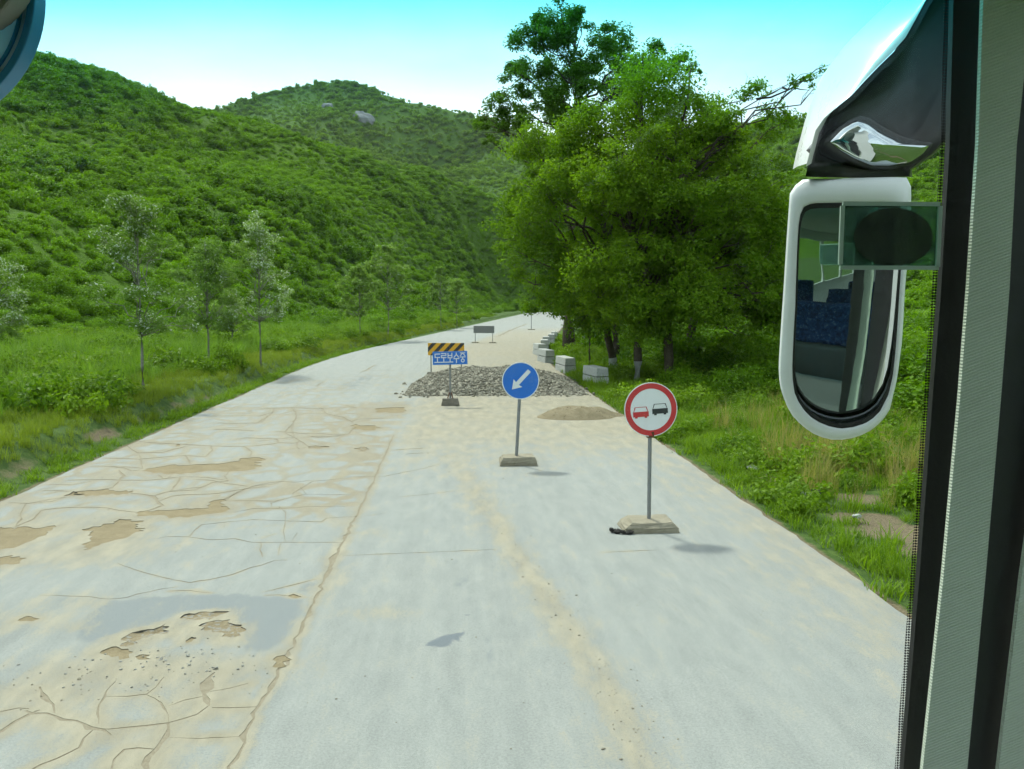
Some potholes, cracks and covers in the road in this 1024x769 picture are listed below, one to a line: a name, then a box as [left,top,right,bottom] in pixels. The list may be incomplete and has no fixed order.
pothole [199,619,246,638]
pothole [0,555,25,567]
pothole [0,525,56,550]
pothole [82,519,144,550]
pothole [100,646,133,659]
pothole [142,457,265,474]
pothole [180,611,229,620]
pothole [137,499,229,519]
crack [0,405,474,769]
pothole [120,624,169,646]
